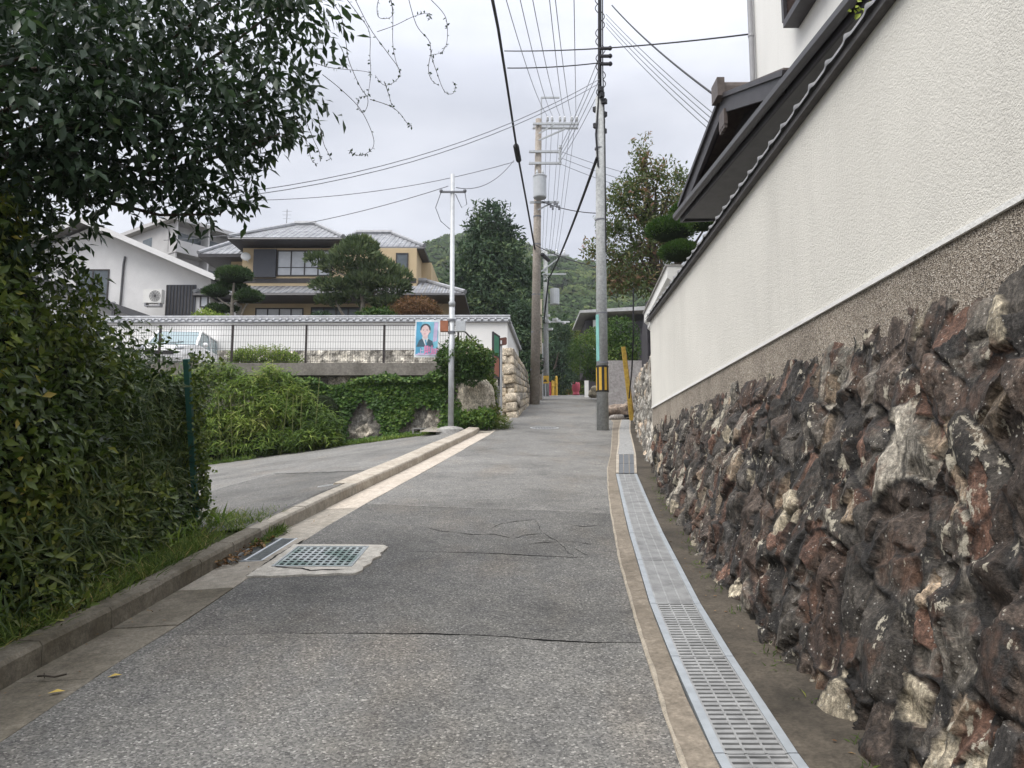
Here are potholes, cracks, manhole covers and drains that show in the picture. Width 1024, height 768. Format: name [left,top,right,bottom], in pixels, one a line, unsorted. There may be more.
drain grate [618,484,646,497]
drain grate [637,560,700,605]
drain grate [650,603,733,658]
drain grate [227,538,297,563]
crack [430,519,602,558]
drain grate [616,474,641,484]
drain grate [715,753,809,768]
drain grate [629,532,677,560]
drain grate [616,454,637,474]
drain grate [671,656,798,757]
drain grate [621,496,653,512]
drain grate [624,512,663,533]
